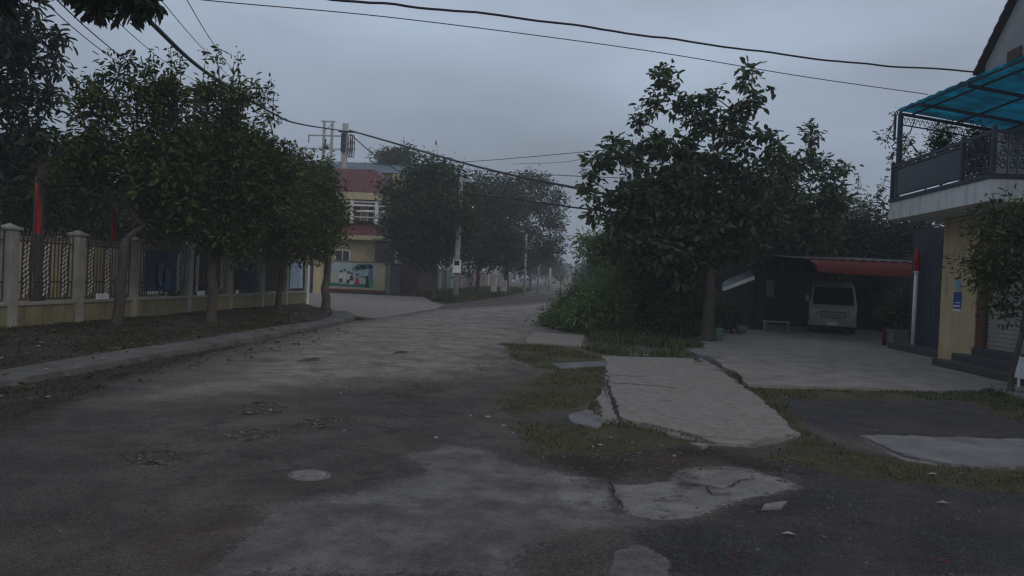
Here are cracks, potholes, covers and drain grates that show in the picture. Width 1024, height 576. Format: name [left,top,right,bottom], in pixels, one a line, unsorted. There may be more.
pothole [296,416,348,429]
pothole [98,448,199,471]
pothole [224,401,288,415]
crack [608,481,623,507]
pothole [214,427,294,442]
manhole cover [287,469,332,481]
crack [686,478,754,494]
